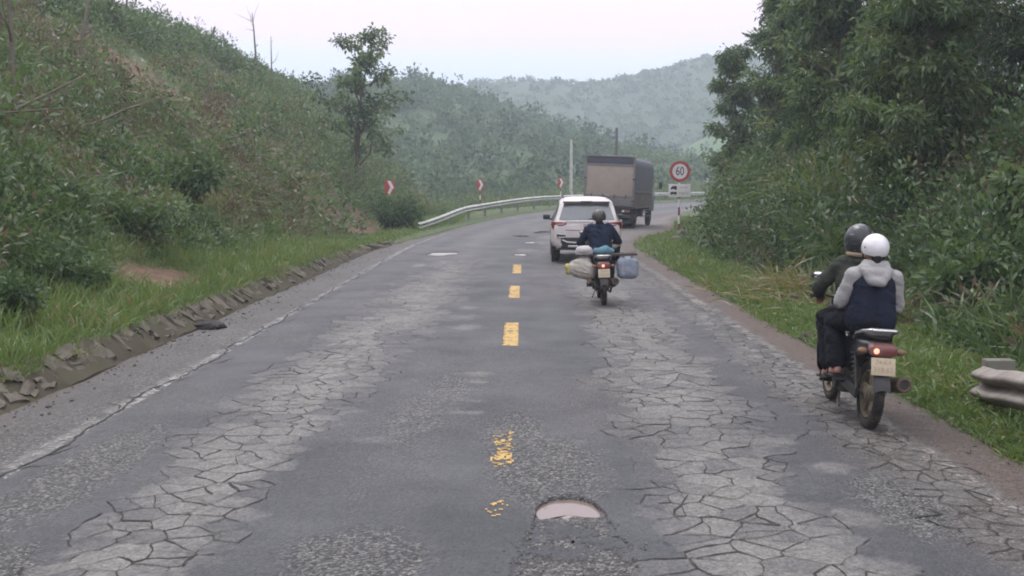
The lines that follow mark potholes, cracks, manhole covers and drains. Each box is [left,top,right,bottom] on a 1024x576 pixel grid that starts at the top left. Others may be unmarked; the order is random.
crack [547,260,925,576]
crack [1,261,487,576]
pothole [495,484,651,576]
